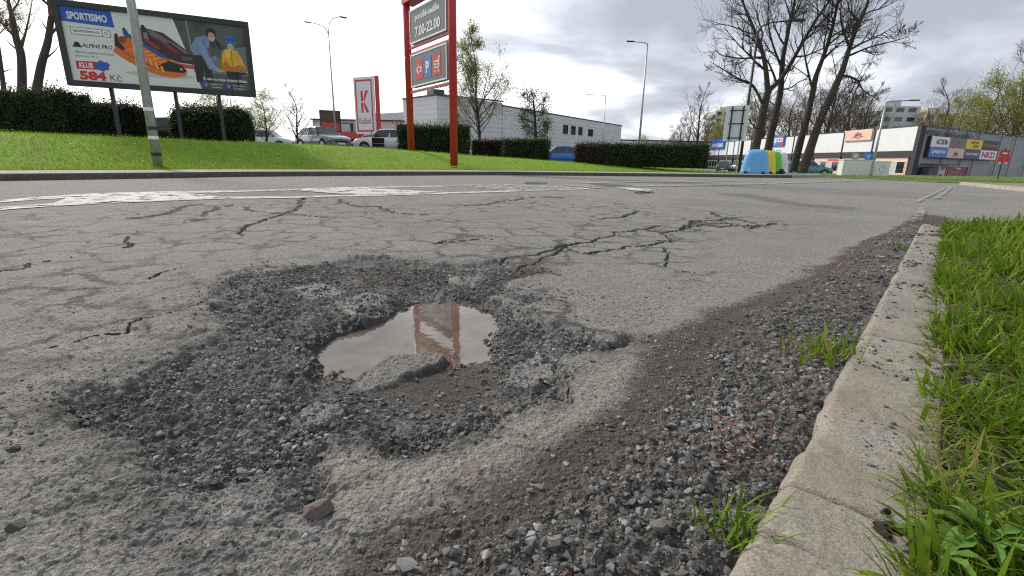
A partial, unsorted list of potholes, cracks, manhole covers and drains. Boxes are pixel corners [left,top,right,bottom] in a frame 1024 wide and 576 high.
crack [433,211,779,274]
pothole [58,256,637,515]
crack [465,196,565,206]
crack [122,198,429,248]
crack [49,301,203,348]
crack [0,260,51,272]
